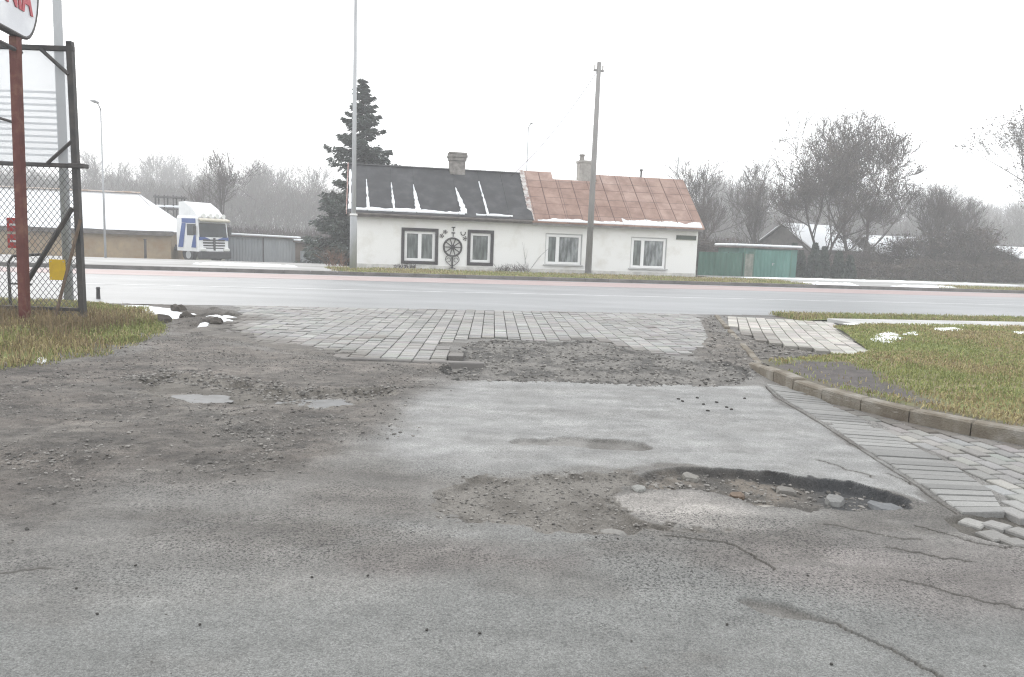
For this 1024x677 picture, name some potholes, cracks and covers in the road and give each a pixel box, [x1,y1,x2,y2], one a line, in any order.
pothole [426,469,736,539]
pothole [128,372,403,411]
crack [835,579,1024,677]
pothole [438,340,755,387]
crack [823,524,1024,562]
crack [818,460,913,485]
crack [664,535,777,571]
pothole [633,466,914,513]
pothole [503,436,655,451]
